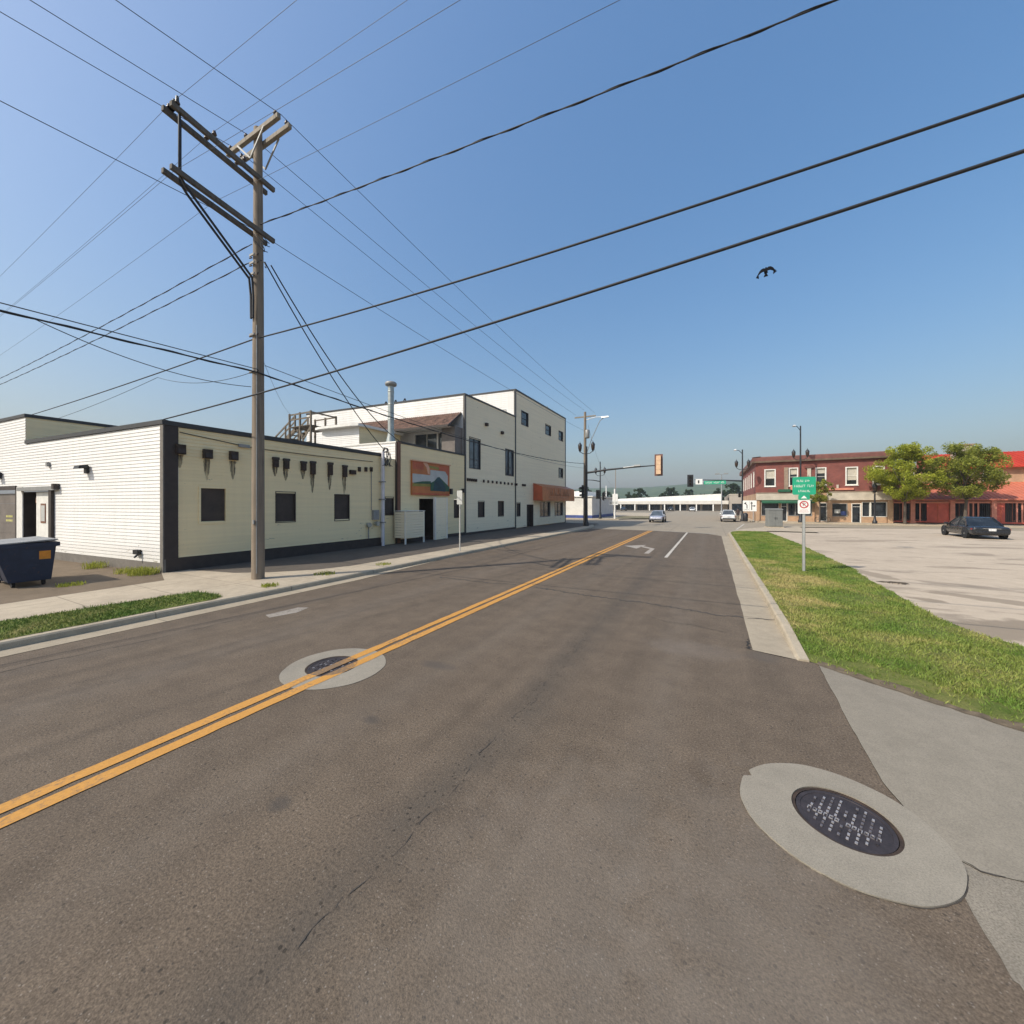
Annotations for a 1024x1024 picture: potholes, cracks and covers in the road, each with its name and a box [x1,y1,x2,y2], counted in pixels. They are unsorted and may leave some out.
manhole cover [740,763,969,909]
crack [296,618,602,950]
manhole cover [279,648,386,690]
